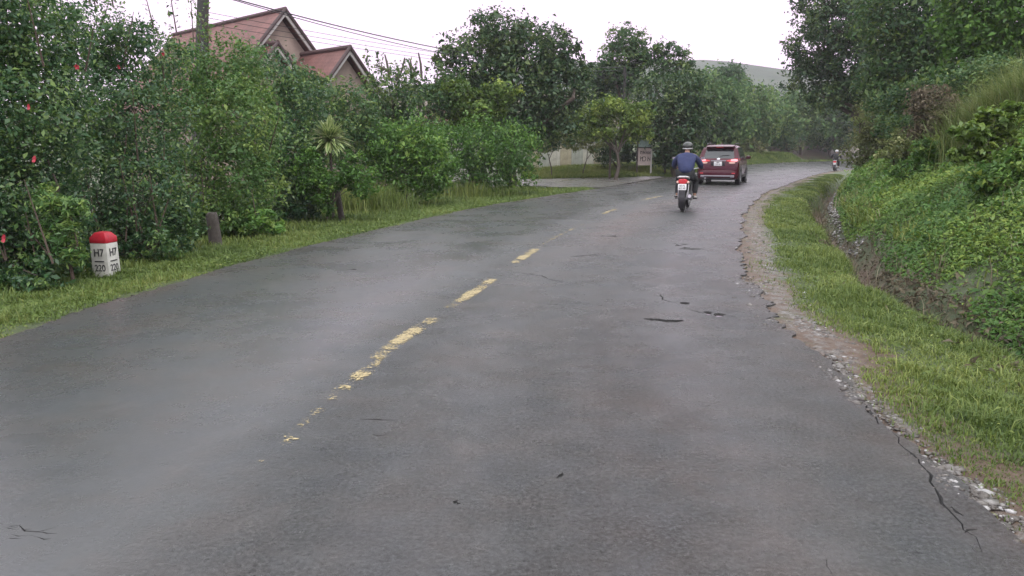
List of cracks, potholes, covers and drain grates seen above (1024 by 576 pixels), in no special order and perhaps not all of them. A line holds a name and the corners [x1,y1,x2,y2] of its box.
crack [4,525,58,540]
crack [842,380,983,553]
